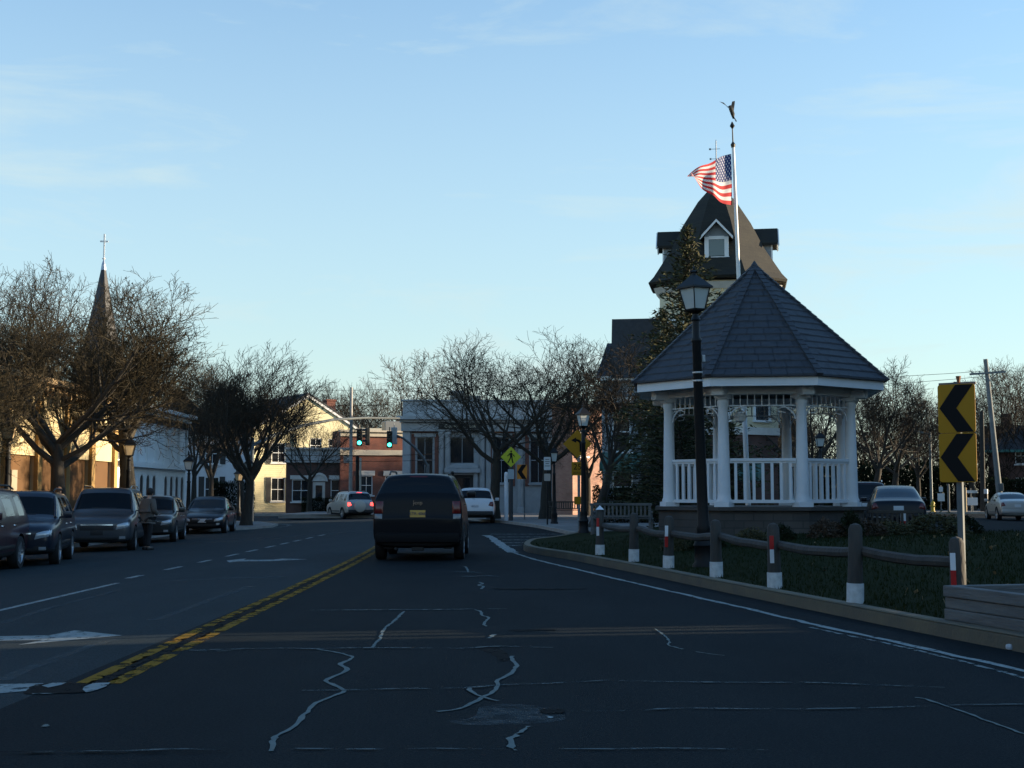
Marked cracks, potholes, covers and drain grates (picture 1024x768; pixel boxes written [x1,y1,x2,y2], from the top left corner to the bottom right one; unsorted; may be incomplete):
crack [914,697,1024,734]
crack [506,726,530,750]
crack [474,610,553,648]
crack [655,629,718,655]
crack [462,566,586,589]
crack [466,688,498,701]
